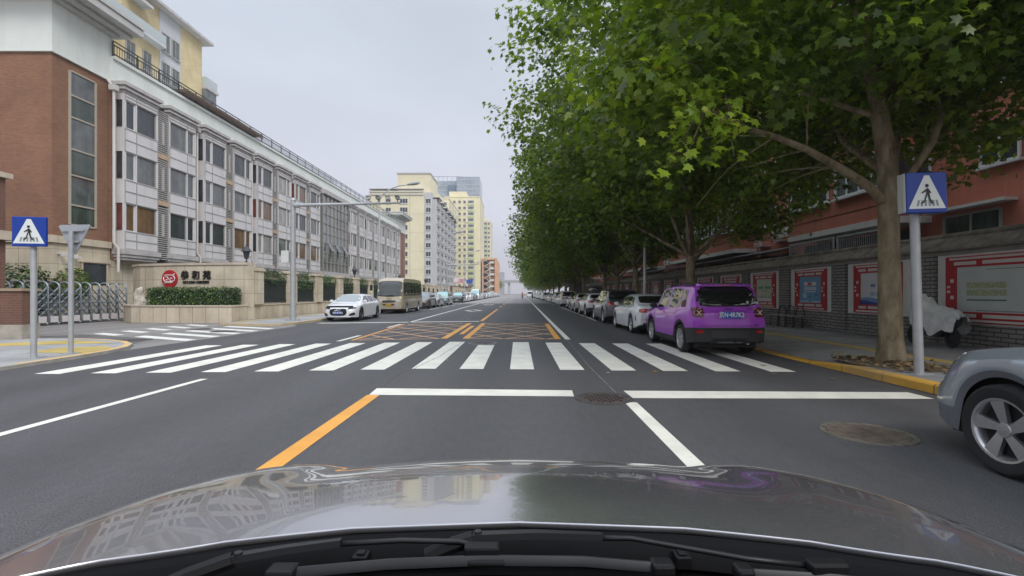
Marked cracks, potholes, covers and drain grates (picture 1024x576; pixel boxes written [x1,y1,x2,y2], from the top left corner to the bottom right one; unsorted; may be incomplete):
manhole cover [575,392,633,405]
manhole cover [818,422,921,447]
